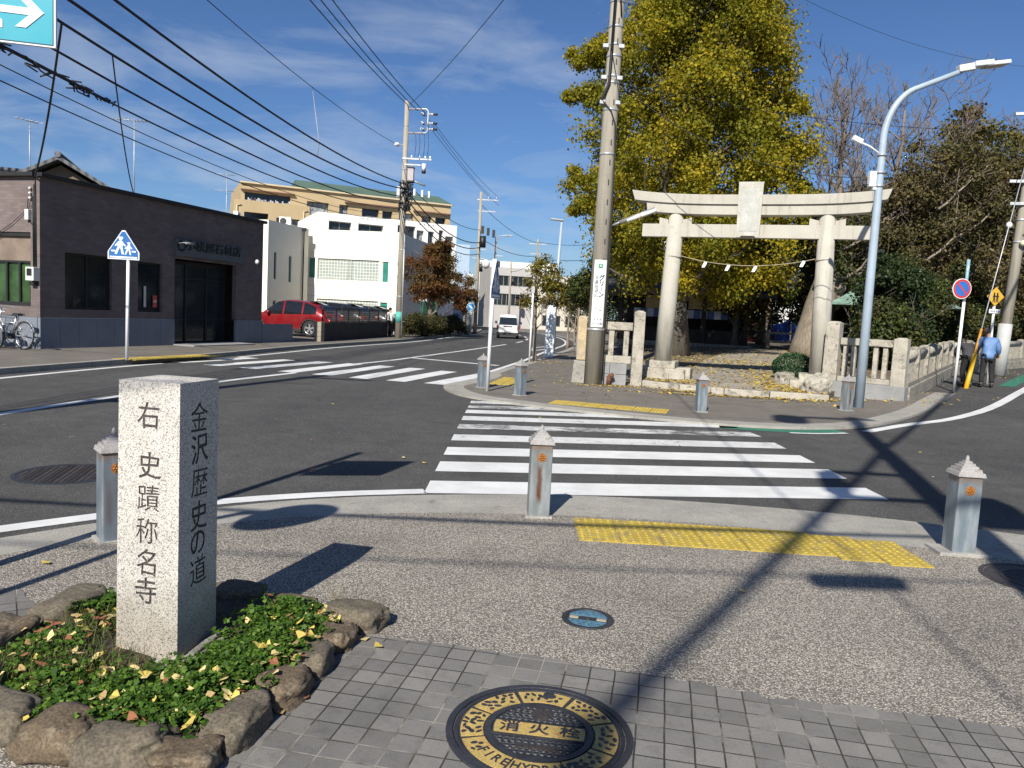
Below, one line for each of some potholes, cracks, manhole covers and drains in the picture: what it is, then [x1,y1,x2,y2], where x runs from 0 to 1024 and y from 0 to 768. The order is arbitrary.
manhole cover [10,464,96,485]
manhole cover [562,608,614,630]
manhole cover [445,685,633,768]
manhole cover [978,563,1024,591]
